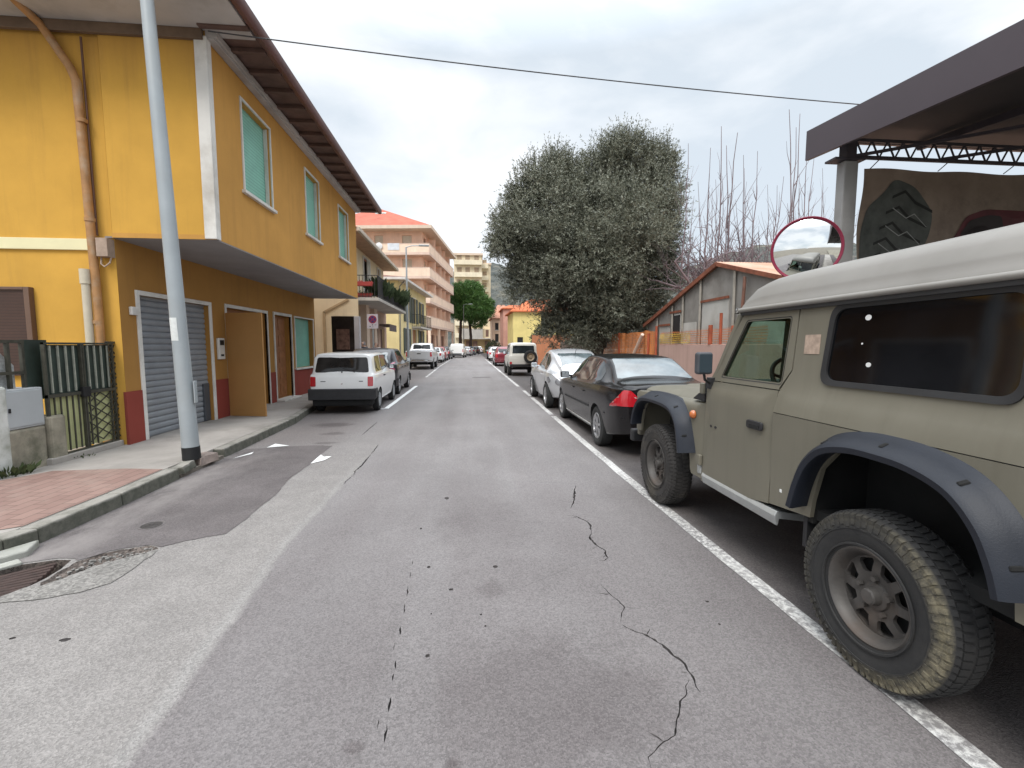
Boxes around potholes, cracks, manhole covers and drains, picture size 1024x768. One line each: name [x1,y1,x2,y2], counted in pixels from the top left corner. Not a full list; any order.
manhole cover [137,520,166,530]
drain grate [0,560,71,596]
crack [344,422,378,484]
crack [494,482,608,594]
crack [600,588,700,767]
